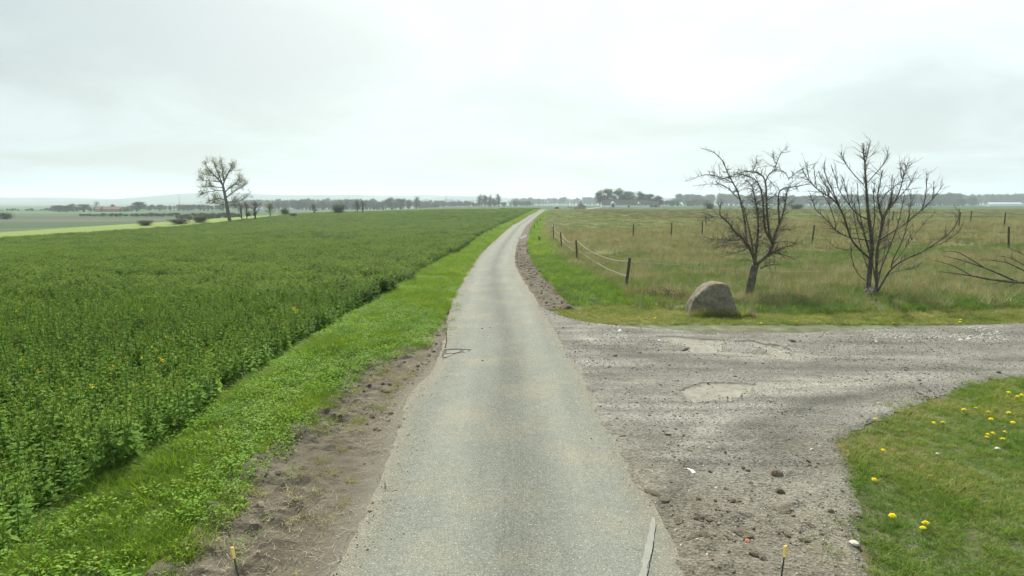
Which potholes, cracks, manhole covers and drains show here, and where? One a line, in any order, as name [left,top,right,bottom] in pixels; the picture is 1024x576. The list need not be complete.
crack [639,517,657,576]
